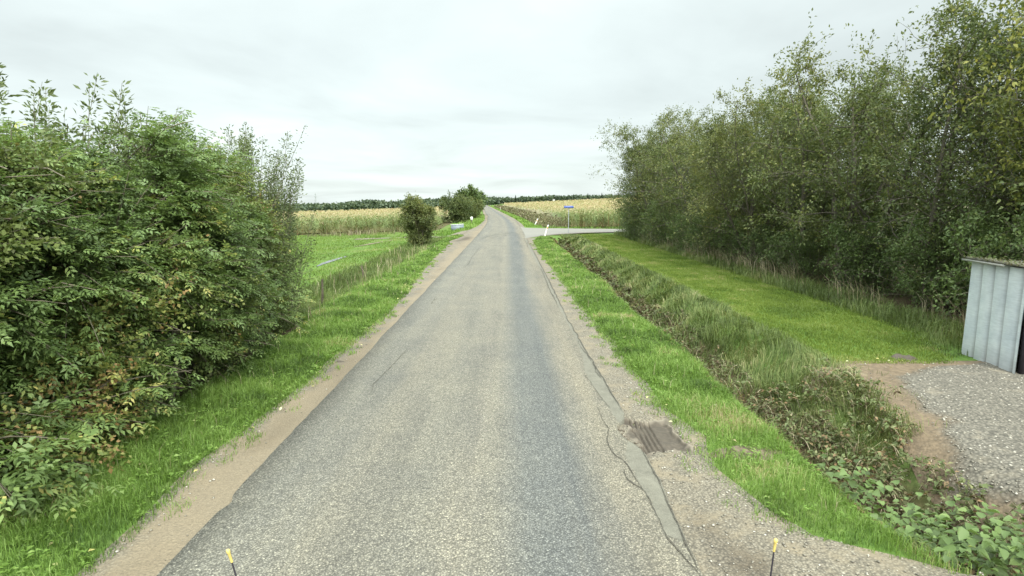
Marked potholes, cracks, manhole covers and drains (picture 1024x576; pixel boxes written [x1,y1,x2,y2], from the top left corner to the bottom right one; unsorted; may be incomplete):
crack [516,240,701,576]
